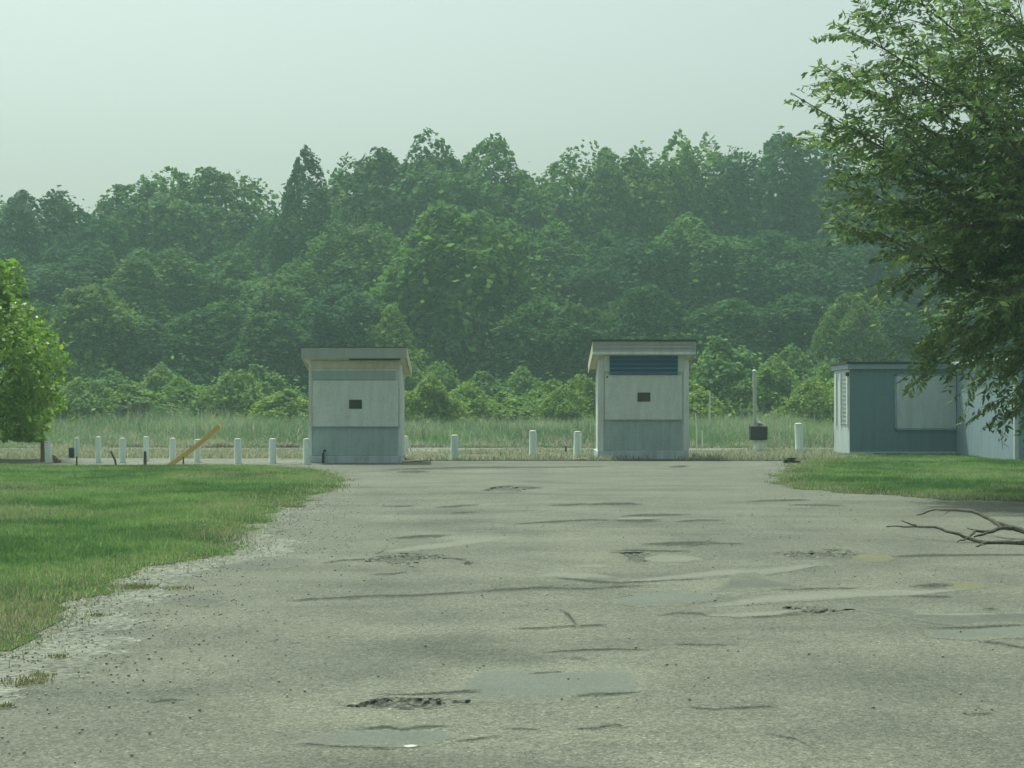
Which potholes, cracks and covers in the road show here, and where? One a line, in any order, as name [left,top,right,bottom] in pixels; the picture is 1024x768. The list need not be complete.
crack [287,534,704,602]
pothole [773,547,864,560]
pothole [605,547,658,565]
crack [512,609,610,629]
pothole [358,552,454,568]
pothole [774,605,859,615]
pothole [478,485,532,493]
crack [507,487,725,525]
pothole [335,692,480,713]
